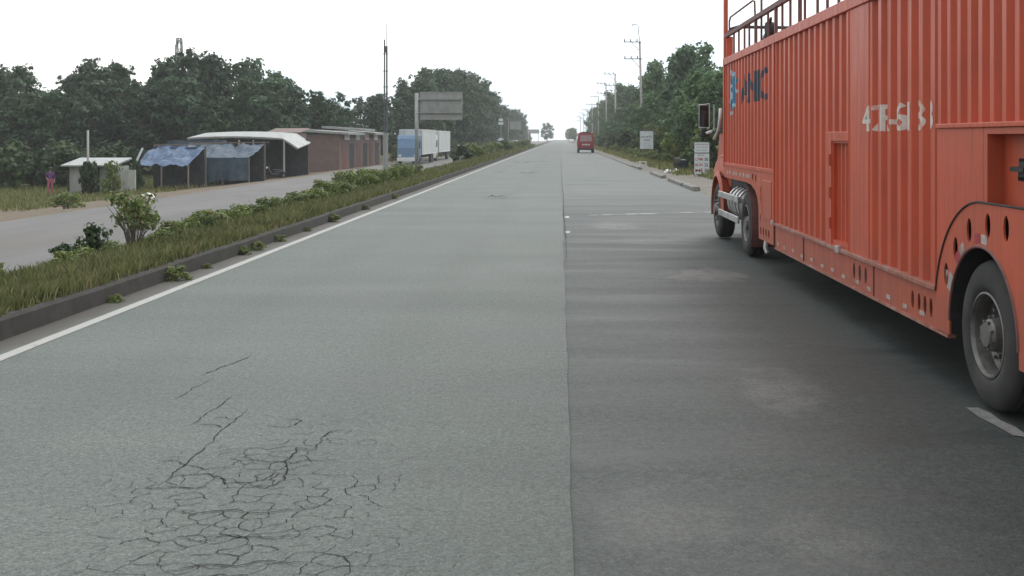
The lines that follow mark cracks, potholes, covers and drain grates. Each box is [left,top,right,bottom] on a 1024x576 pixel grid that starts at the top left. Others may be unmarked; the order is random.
crack [50,398,487,576]
